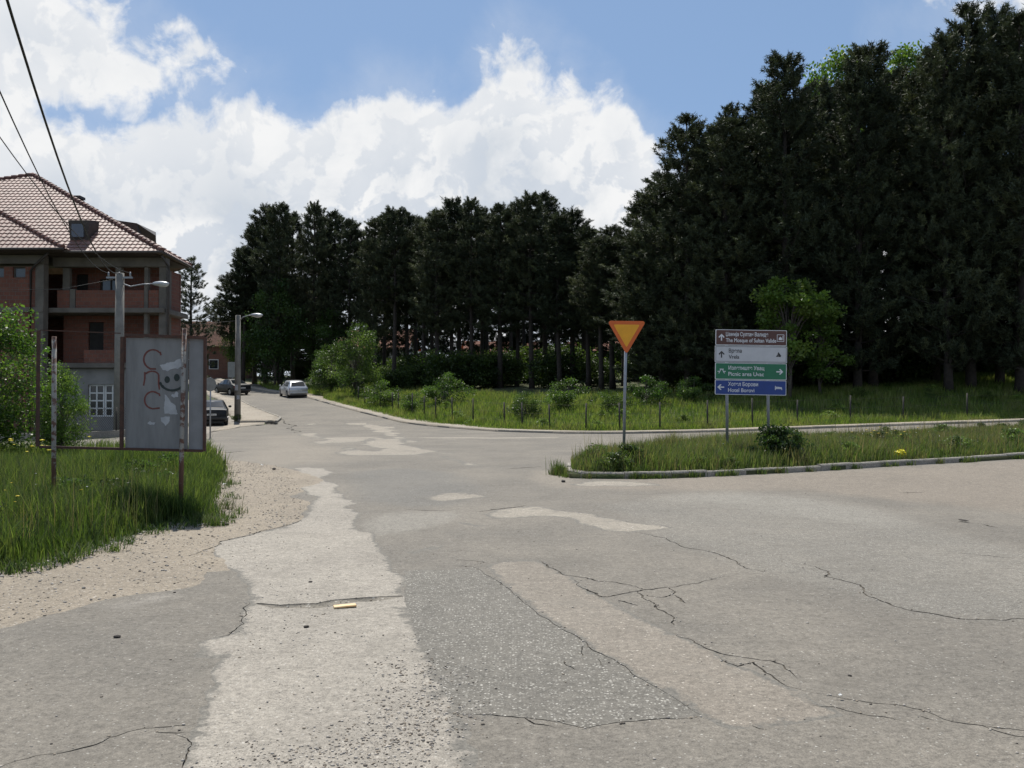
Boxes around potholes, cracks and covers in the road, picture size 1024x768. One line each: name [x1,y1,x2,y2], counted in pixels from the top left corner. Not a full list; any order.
crack [188,520,301,556]
crack [220,596,403,637]
crack [3,723,196,768]
crack [470,560,699,714]
crack [636,532,764,572]
crack [815,566,1021,620]
crack [811,692,1024,737]
crack [476,714,695,728]
crack [542,562,800,690]
